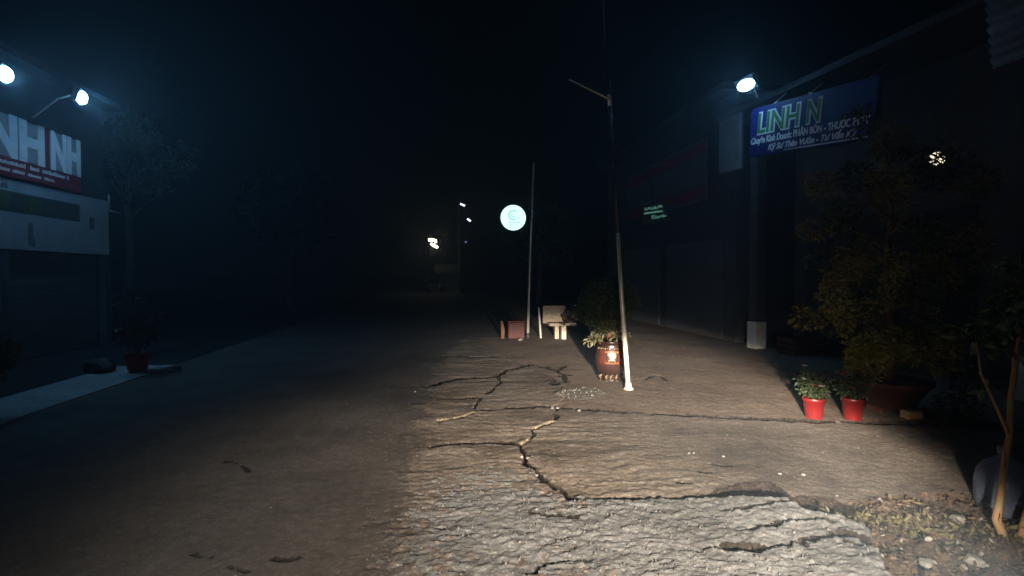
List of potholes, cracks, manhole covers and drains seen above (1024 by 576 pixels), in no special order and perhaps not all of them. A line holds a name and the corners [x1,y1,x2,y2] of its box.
crack [428,356,580,519]
crack [675,463,733,484]
